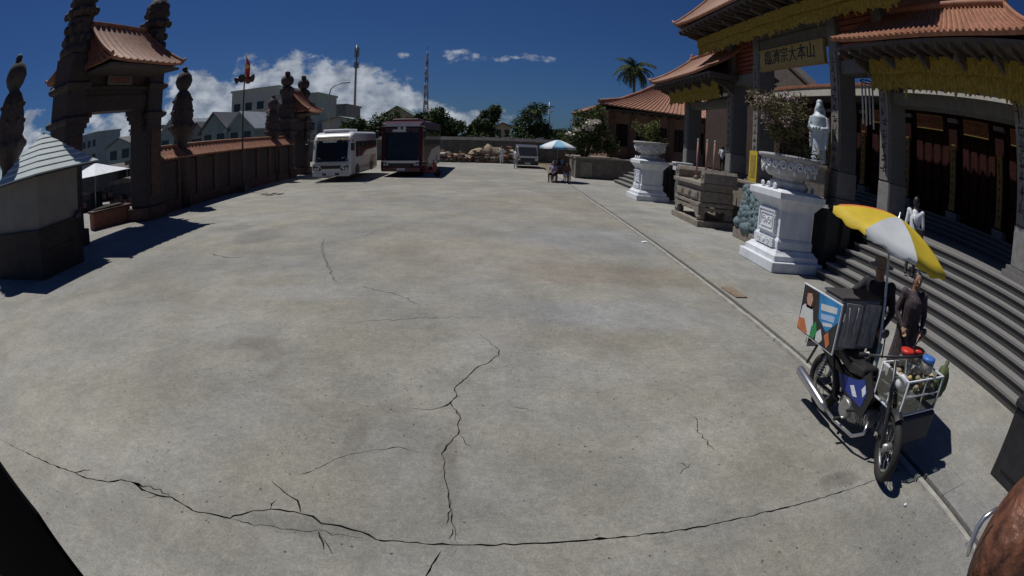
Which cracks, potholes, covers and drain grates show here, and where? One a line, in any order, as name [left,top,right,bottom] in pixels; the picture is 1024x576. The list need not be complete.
crack [0,335,900,576]
crack [321,225,484,324]
